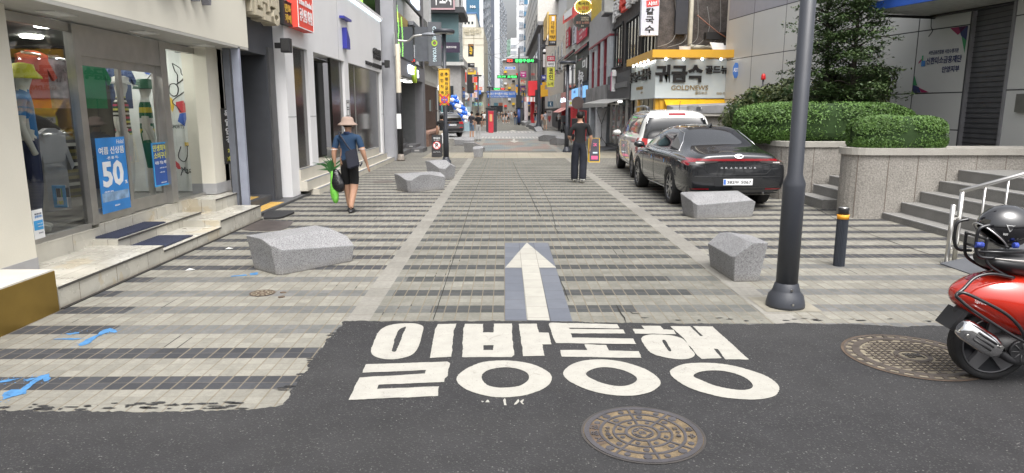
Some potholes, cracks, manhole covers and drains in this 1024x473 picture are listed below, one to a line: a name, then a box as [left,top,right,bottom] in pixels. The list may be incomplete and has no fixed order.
manhole cover [841,334,981,381]
manhole cover [581,406,706,464]
crack [433,158,489,320]
